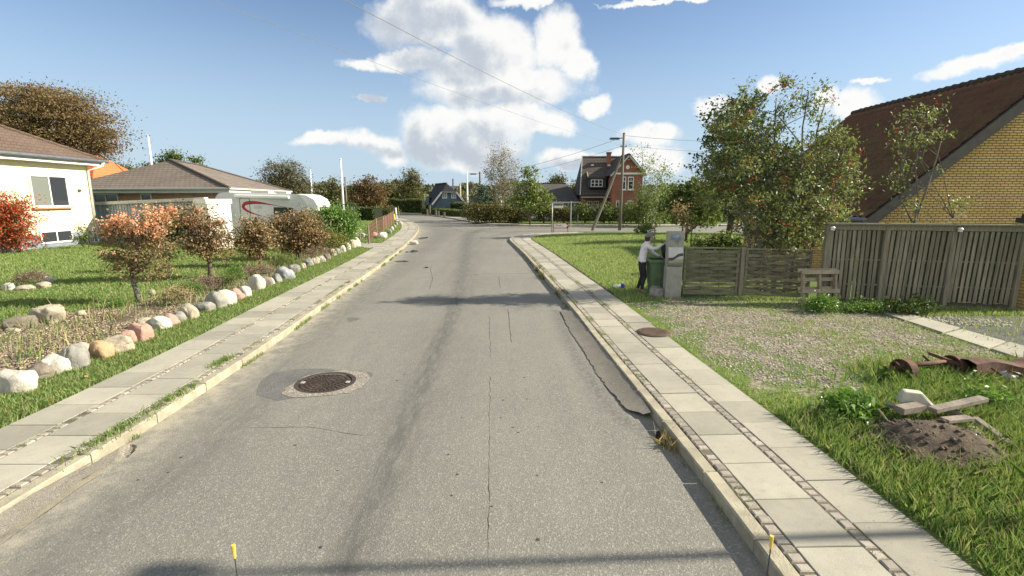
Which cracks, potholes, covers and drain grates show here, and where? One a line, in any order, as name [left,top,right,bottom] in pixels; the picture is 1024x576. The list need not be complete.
pothole [121,444,137,458]
manhole cover [637,327,671,337]
manhole cover [281,370,370,398]
